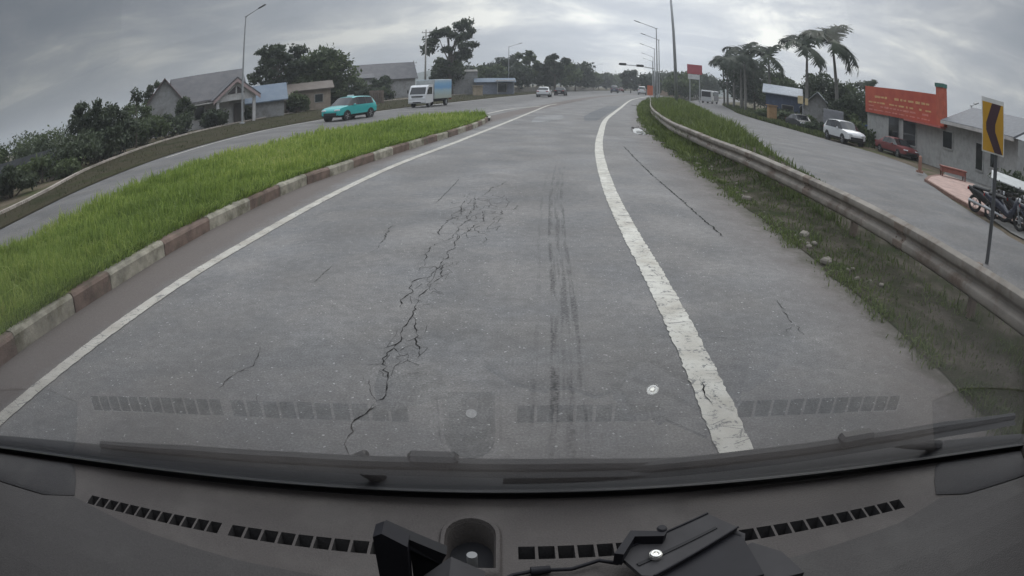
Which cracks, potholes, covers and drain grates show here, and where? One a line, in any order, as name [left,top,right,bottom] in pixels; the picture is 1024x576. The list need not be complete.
crack [350,179,518,430]
crack [623,146,722,236]
